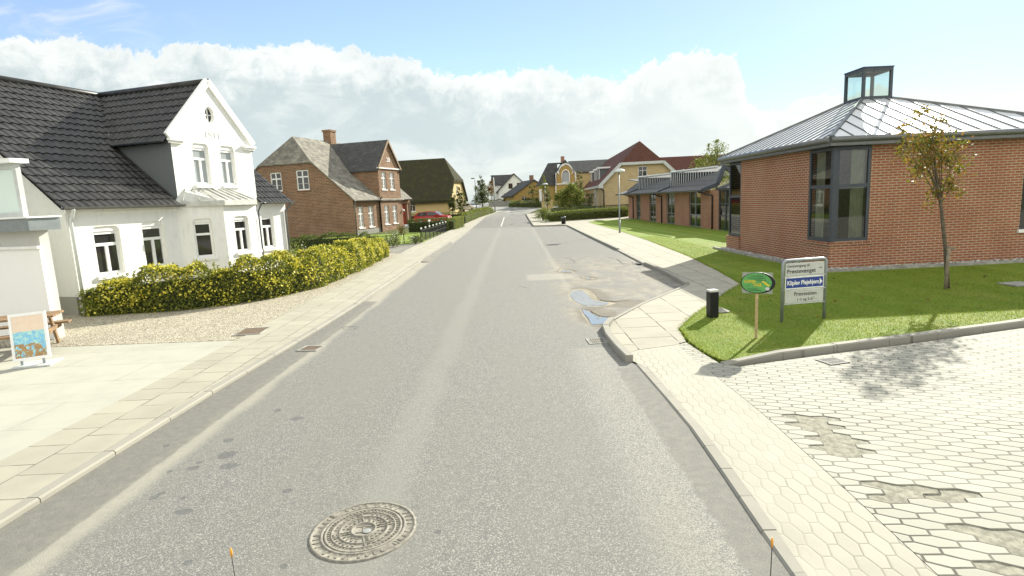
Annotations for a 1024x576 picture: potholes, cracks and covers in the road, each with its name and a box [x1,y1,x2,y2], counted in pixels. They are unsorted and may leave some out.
pothole [580,309,608,326]
manhole cover [308,502,416,563]
pothole [568,289,617,307]
drain grate [815,357,850,365]
